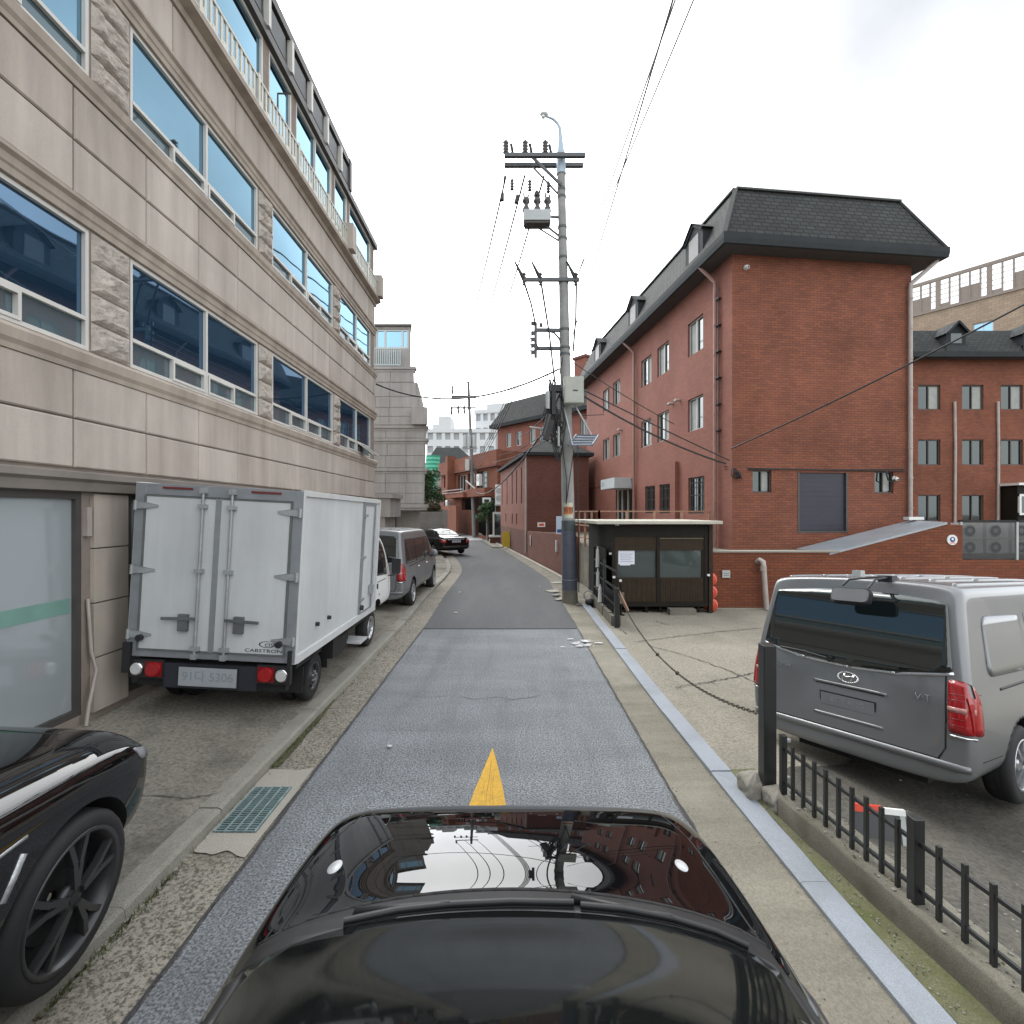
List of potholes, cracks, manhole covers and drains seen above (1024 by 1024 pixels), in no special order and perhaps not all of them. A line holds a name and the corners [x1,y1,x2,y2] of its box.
crack [611,621,754,688]
drain grate [213,786,292,833]
